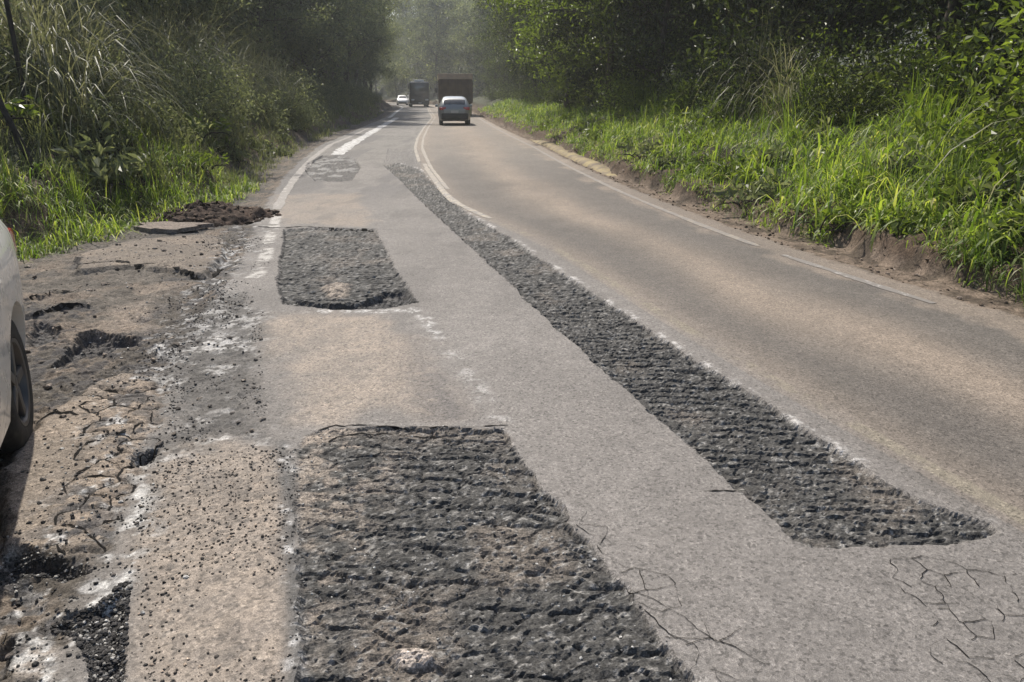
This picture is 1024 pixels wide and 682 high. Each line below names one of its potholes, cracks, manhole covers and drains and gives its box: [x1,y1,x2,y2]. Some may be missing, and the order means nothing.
pothole [26,321,61,348]
crack [890,555,1024,682]
pothole [126,448,161,469]
pothole [56,587,132,682]
crack [41,387,161,554]
pothole [0,543,95,587]
pothole [46,328,141,369]
crack [576,511,767,682]
